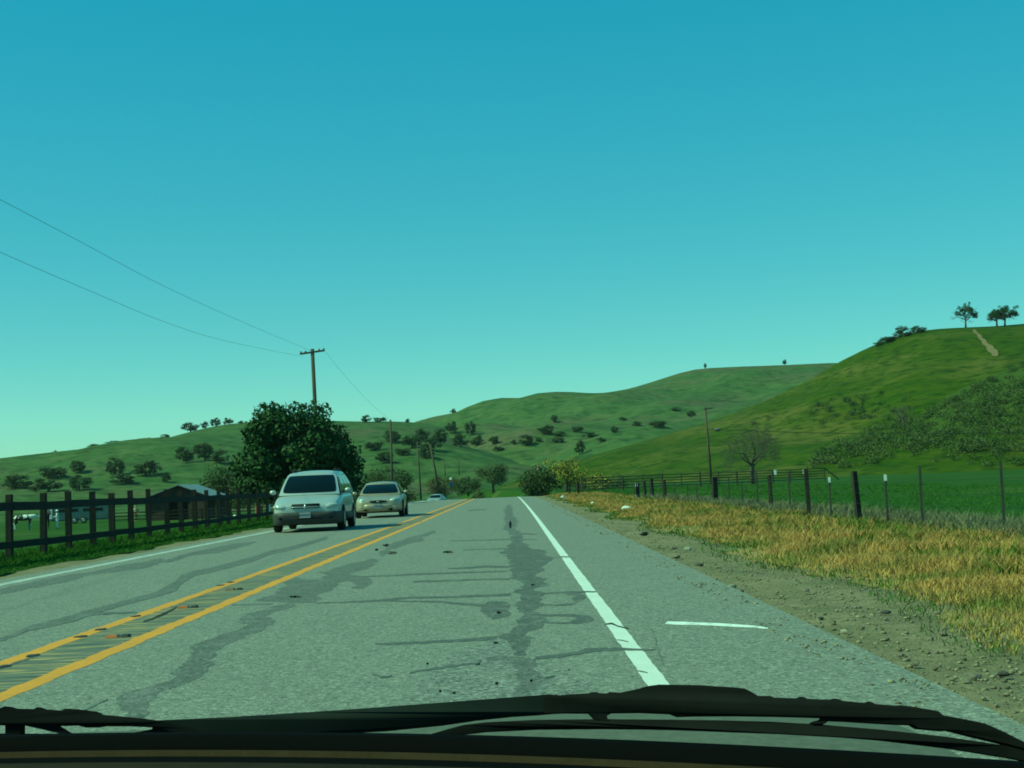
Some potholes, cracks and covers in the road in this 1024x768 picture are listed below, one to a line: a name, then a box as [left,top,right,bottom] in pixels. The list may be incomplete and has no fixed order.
crack [637,628,664,673]
